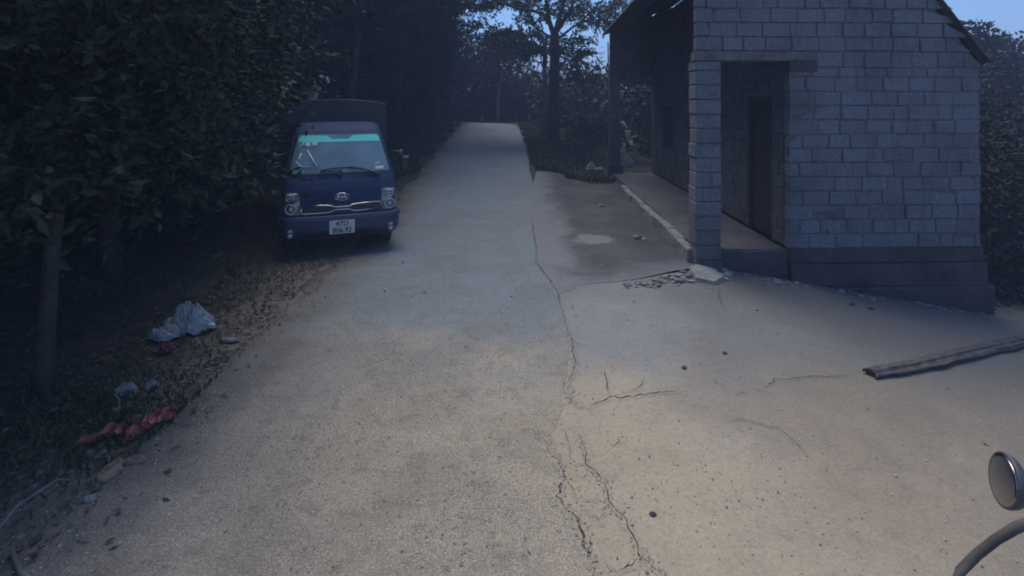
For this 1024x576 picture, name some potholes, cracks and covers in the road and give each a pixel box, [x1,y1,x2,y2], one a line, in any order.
crack [728,418,809,456]
crack [716,286,726,307]
crack [734,374,850,396]
crack [535,428,666,576]
